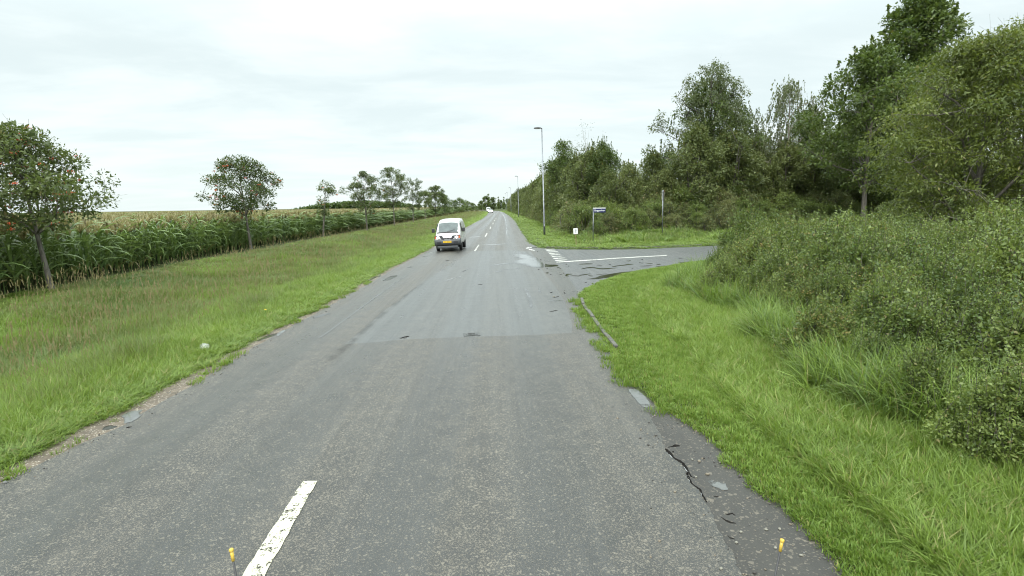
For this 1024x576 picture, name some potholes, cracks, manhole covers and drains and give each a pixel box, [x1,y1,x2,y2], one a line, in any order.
crack [665,444,736,539]
crack [550,262,661,312]
